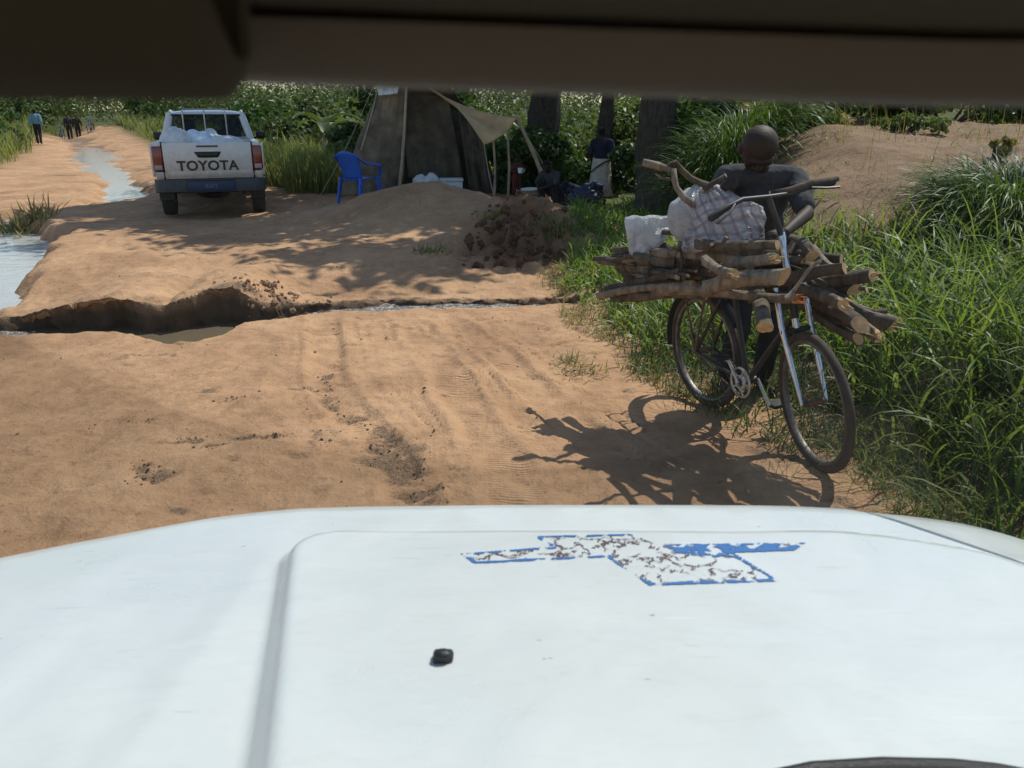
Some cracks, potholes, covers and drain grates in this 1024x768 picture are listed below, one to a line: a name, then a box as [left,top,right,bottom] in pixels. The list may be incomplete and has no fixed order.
pothole [0,285,278,346]
